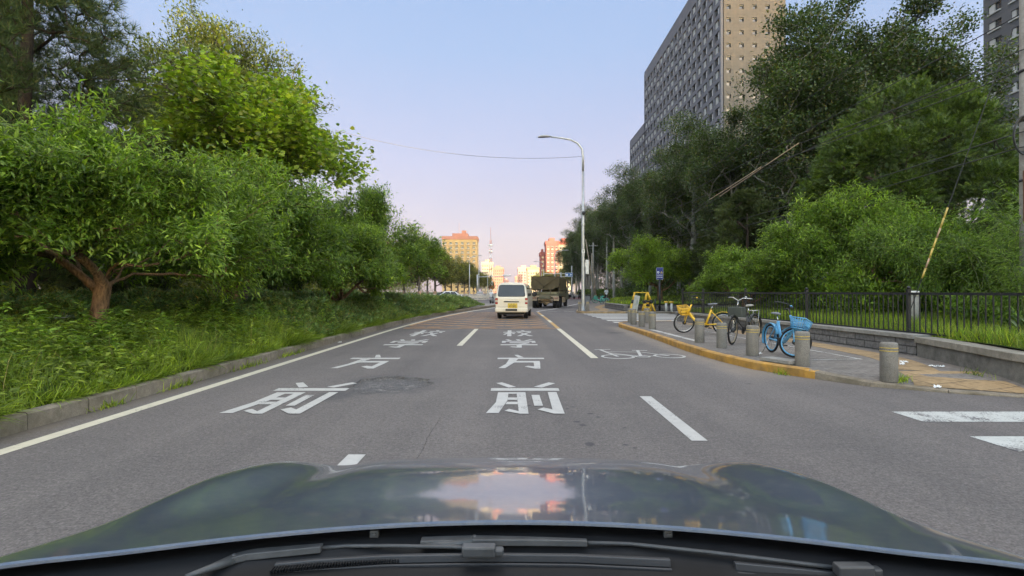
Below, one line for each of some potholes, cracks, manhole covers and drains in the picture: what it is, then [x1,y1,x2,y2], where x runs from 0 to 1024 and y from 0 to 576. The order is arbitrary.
pothole [348,376,434,394]
